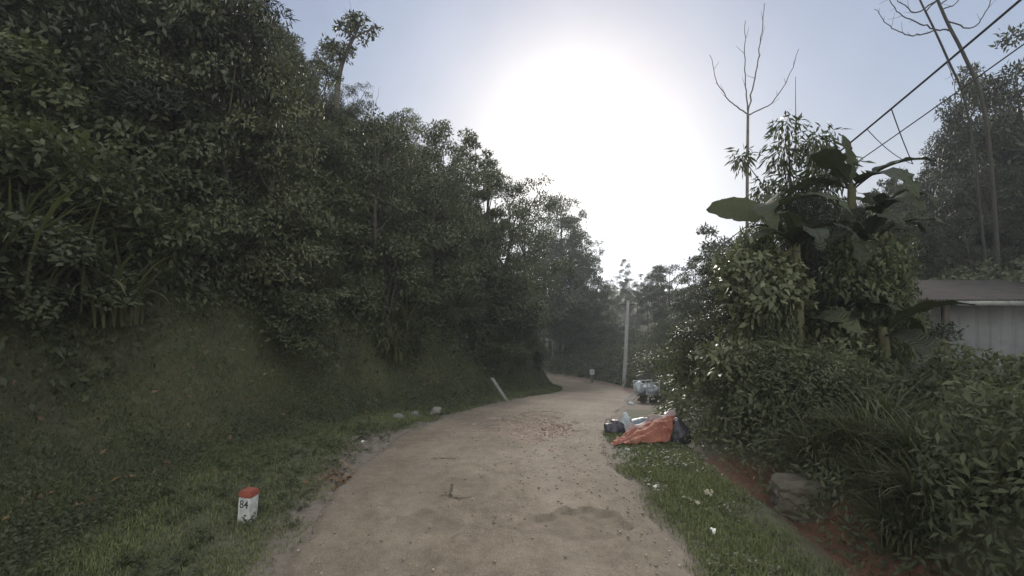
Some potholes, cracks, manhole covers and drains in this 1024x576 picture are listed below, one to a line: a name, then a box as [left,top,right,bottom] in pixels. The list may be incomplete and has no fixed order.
pothole [503,505,644,546]
